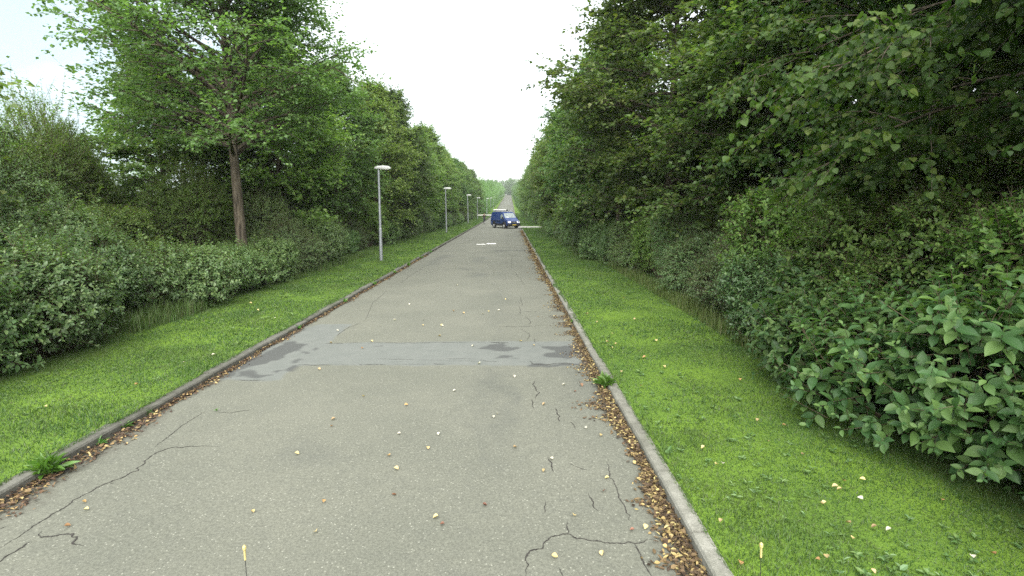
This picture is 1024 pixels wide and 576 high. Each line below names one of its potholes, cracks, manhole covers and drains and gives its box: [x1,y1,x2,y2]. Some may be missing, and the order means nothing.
crack [525,524,658,576]
crack [1,416,214,561]
